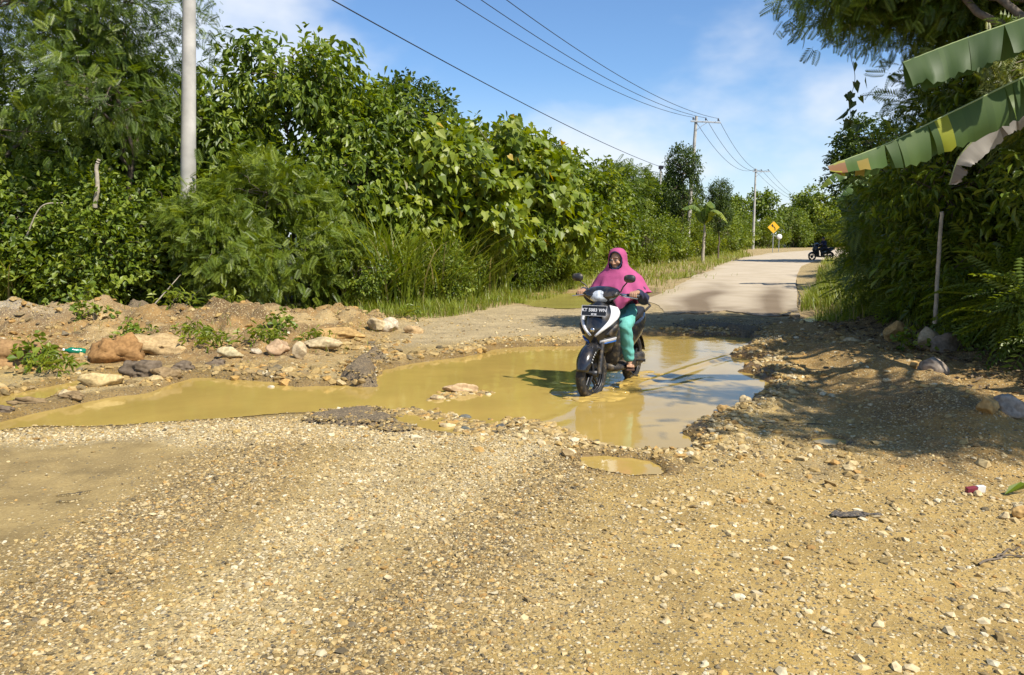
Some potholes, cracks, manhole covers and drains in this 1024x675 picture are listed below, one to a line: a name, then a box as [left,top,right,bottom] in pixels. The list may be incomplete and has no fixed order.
pothole [574,449,670,476]
pothole [0,330,781,449]
